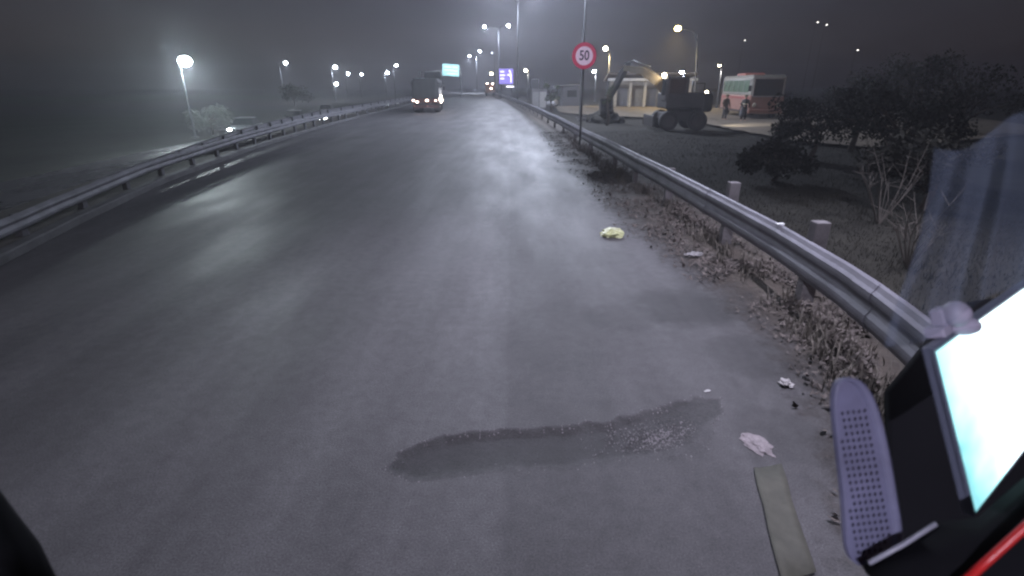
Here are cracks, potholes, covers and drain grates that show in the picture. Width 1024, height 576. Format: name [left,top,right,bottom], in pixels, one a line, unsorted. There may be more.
pothole [380,395,724,483]
